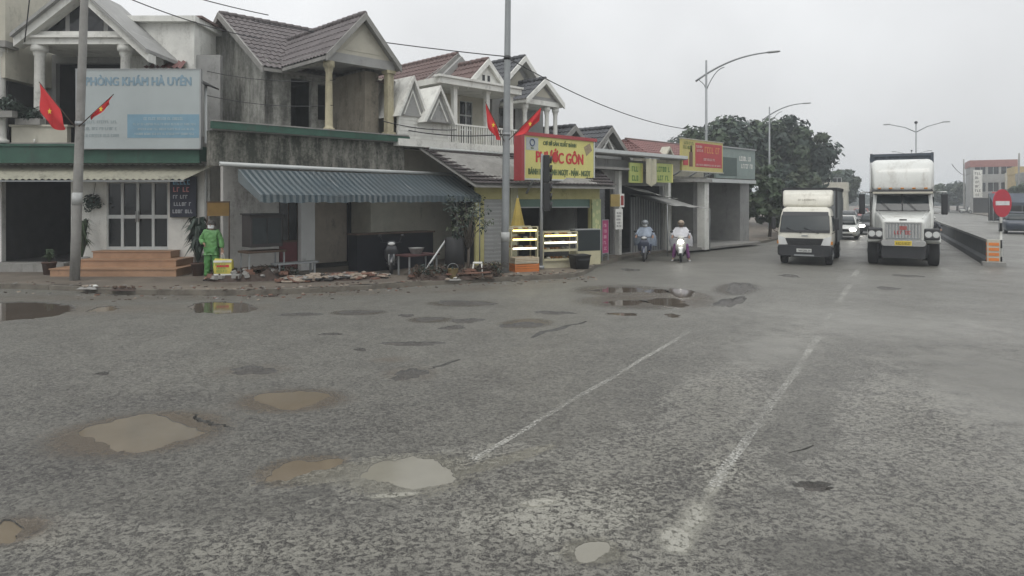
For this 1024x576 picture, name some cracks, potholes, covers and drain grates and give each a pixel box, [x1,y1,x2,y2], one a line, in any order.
pothole [264,458,344,482]
pothole [792,481,834,492]
pothole [360,455,457,490]
pothole [188,301,259,314]
pothole [78,413,207,453]
crack [429,359,460,369]
crack [193,414,230,427]
pothole [639,298,690,308]
pothole [0,301,77,321]
crack [530,321,587,338]
pothole [0,519,24,544]
